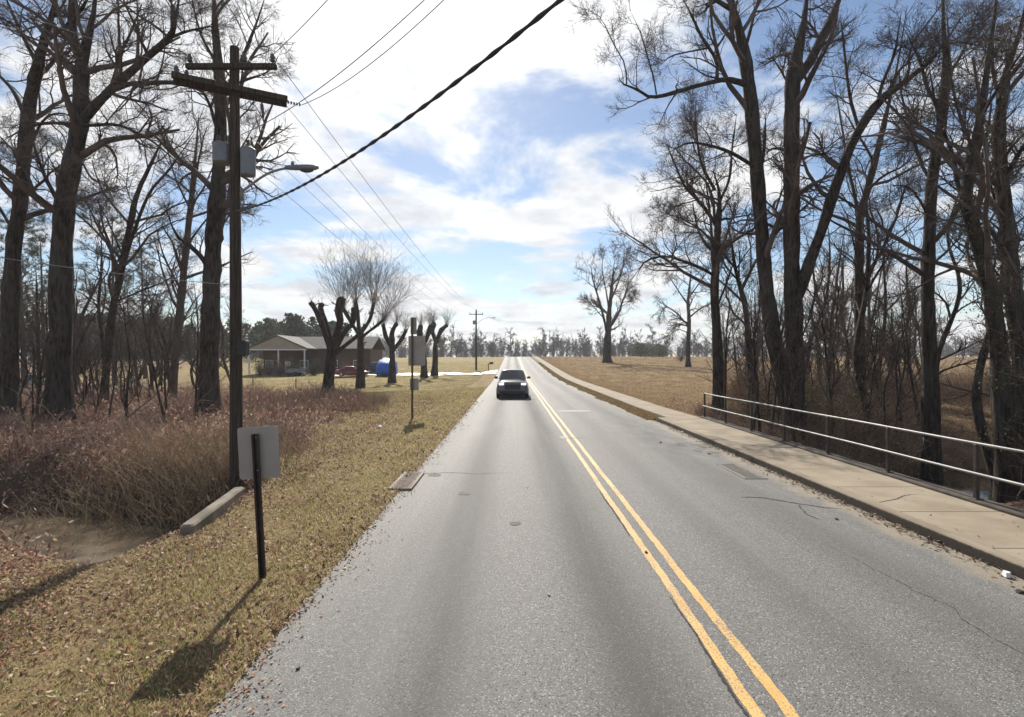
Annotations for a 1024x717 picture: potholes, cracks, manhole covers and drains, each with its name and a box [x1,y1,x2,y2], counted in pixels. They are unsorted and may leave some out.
drain grate [388,472,424,491]
crack [830,546,1024,654]
crack [757,497,841,519]
drain grate [716,464,768,479]
